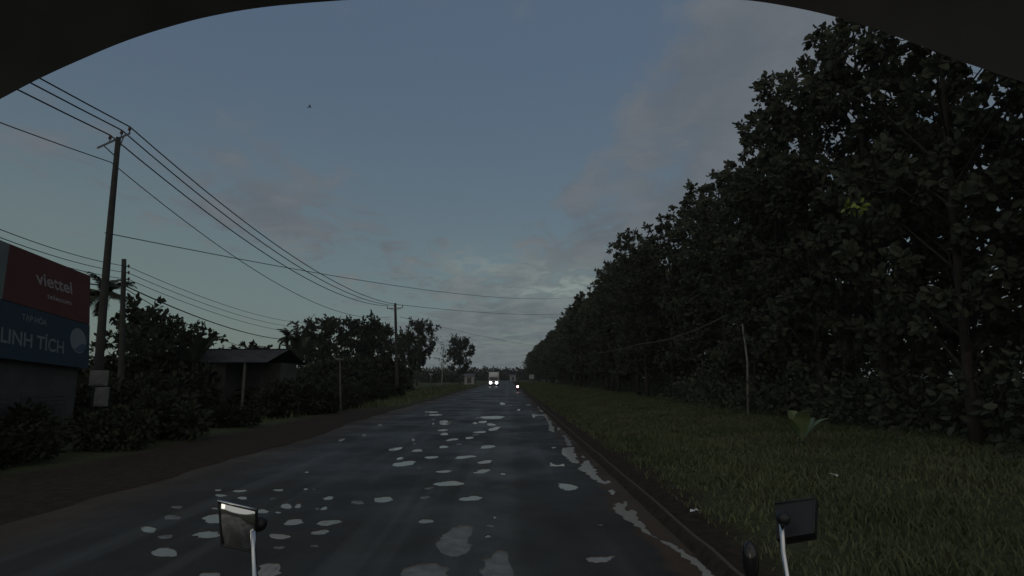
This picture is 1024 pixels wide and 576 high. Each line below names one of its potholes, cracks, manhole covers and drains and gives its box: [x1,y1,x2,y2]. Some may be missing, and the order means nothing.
pothole [585,555,615,563]
pothole [151,547,178,557]
pothole [399,563,449,576]
pothole [191,530,220,538]
pothole [202,513,219,523]
pothole [479,550,514,576]
pothole [435,525,474,556]
